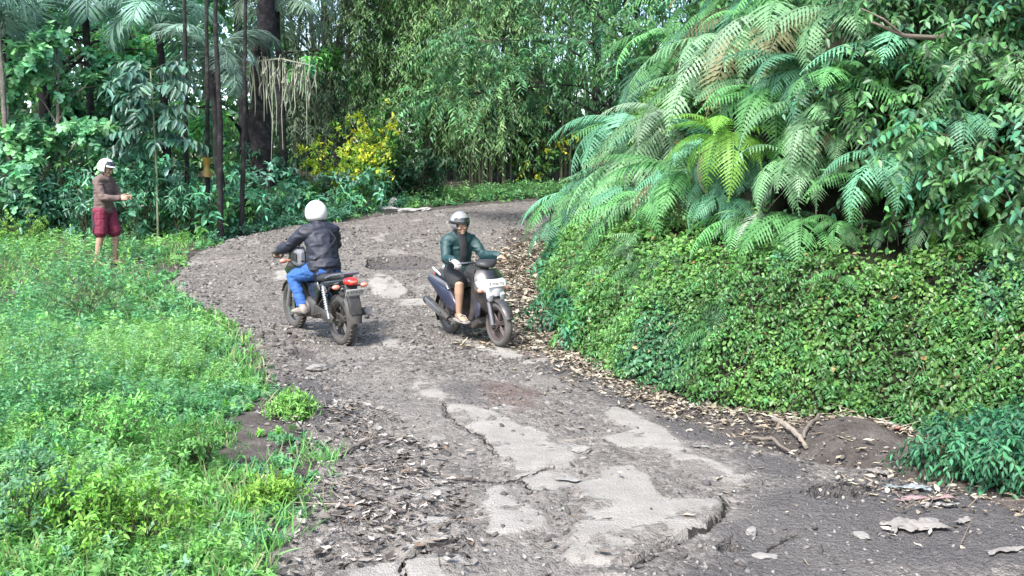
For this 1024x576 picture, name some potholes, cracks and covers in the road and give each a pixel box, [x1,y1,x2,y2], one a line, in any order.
crack [456,467,550,495]
crack [630,496,731,569]
pothole [364,255,439,271]
crack [343,535,470,576]
crack [441,402,501,457]
